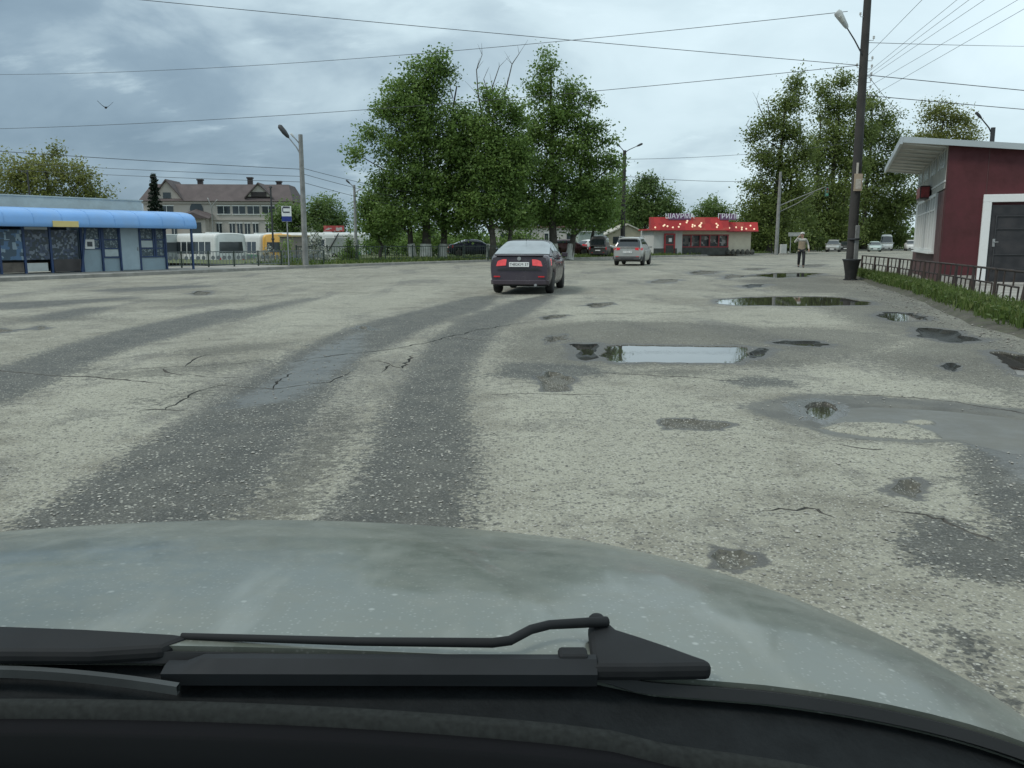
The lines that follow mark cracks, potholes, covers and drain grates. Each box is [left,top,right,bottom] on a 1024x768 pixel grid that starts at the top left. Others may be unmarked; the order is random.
pothole [659,419,732,431]
pothole [916,328,981,343]
crack [885,509,995,542]
pothole [805,402,838,414]
crack [0,354,349,411]
crack [763,507,835,518]
pothole [599,345,750,361]
pothole [747,348,769,358]
pothole [891,478,922,499]
pothole [711,549,758,570]
pothole [569,344,599,360]
pothole [941,363,961,372]
